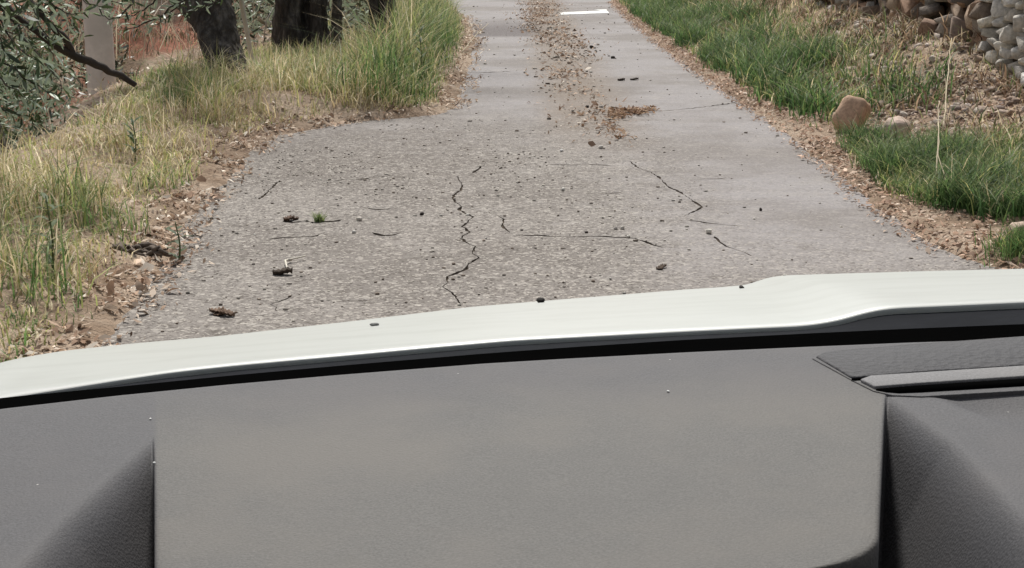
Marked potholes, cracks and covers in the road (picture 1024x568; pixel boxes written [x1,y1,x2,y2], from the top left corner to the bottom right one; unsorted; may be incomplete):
crack [274,220,341,239]
crack [443,165,660,304]
crack [630,161,751,256]
